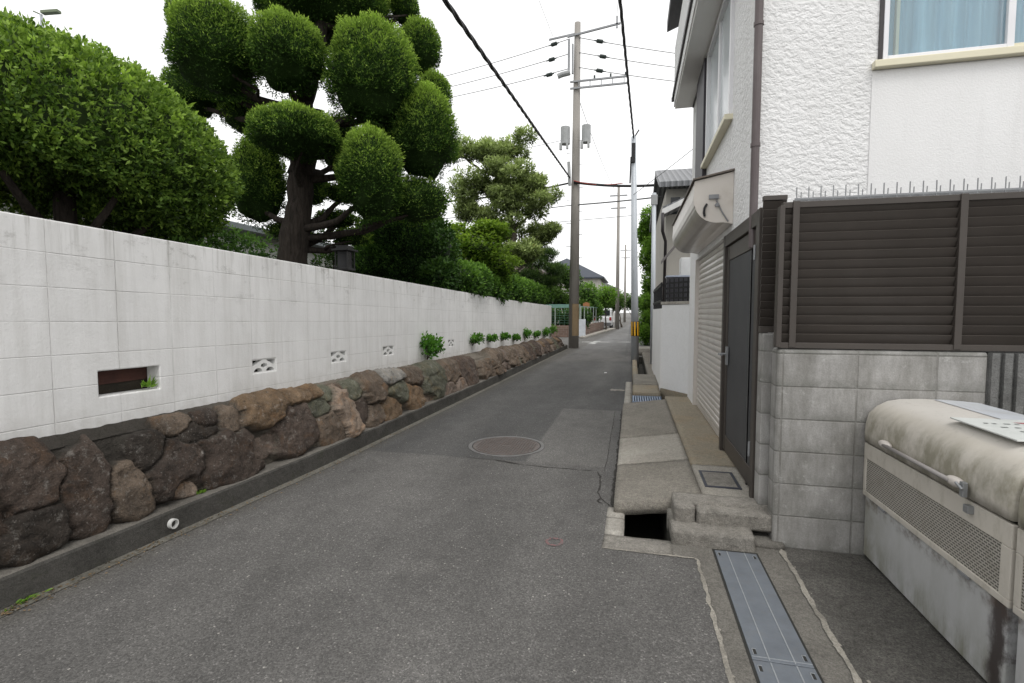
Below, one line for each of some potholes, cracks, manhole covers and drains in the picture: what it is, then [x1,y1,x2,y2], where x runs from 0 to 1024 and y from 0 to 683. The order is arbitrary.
crack [597,411,622,507]
manhole cover [468,436,544,457]
utility cover [698,470,742,490]
